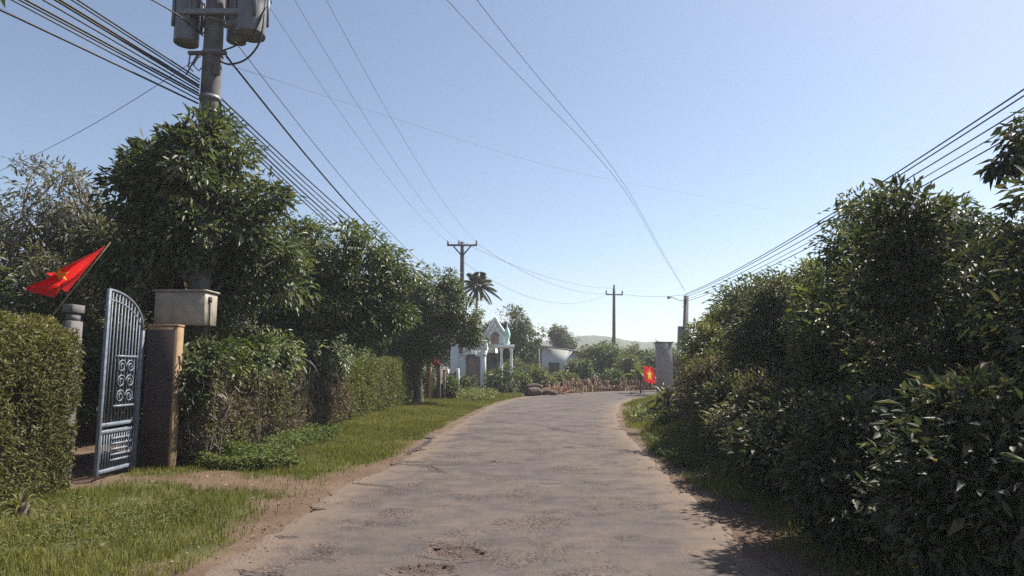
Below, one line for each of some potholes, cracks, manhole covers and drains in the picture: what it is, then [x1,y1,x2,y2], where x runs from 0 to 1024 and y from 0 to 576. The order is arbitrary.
crack [356,436,446,487]
pothole [380,561,463,576]
pothole [418,543,494,563]
